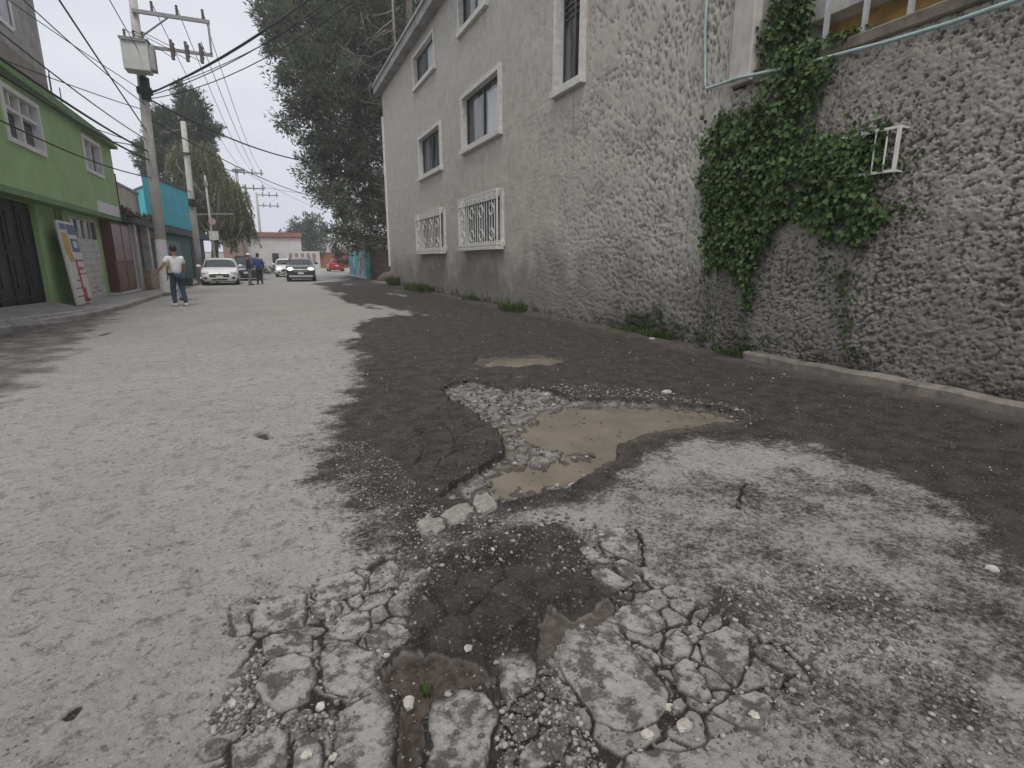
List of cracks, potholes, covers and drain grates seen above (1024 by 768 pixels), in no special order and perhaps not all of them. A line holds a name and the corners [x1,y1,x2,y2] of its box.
pothole [536,592,616,664]
crack [734,482,778,510]
pothole [471,352,567,368]
pothole [437,380,745,501]
crack [191,524,832,768]
